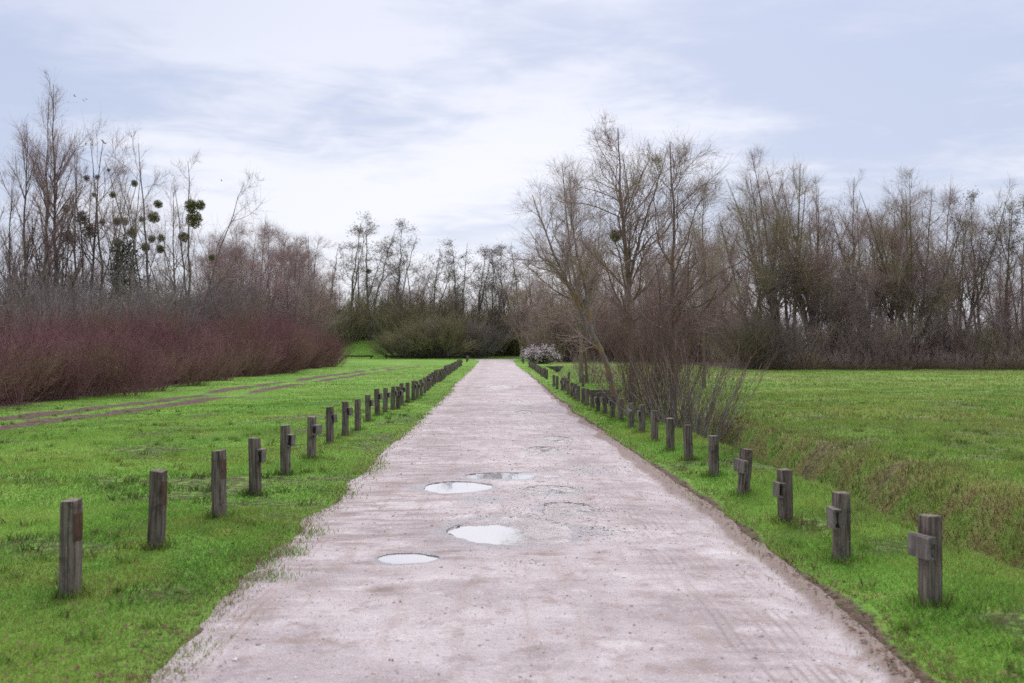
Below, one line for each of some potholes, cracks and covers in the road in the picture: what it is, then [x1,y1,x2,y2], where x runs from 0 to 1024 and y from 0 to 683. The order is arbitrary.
pothole [377,553,440,564]
pothole [542,502,593,516]
pothole [424,481,493,494]
pothole [446,516,574,546]
pothole [526,446,560,456]
